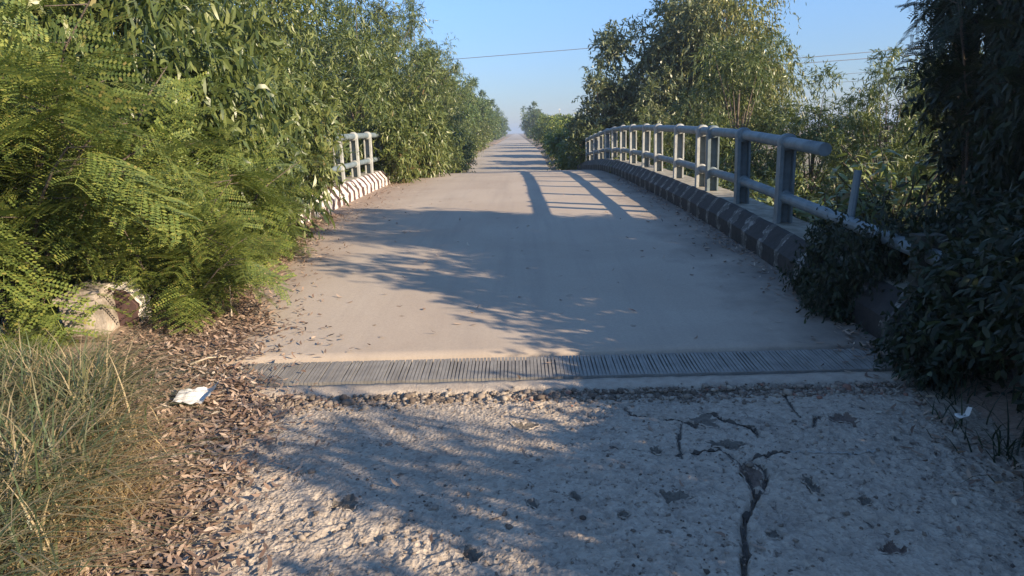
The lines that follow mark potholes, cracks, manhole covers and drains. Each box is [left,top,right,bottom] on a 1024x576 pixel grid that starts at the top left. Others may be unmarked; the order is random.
crack [784,396,823,428]
crack [665,412,790,576]
